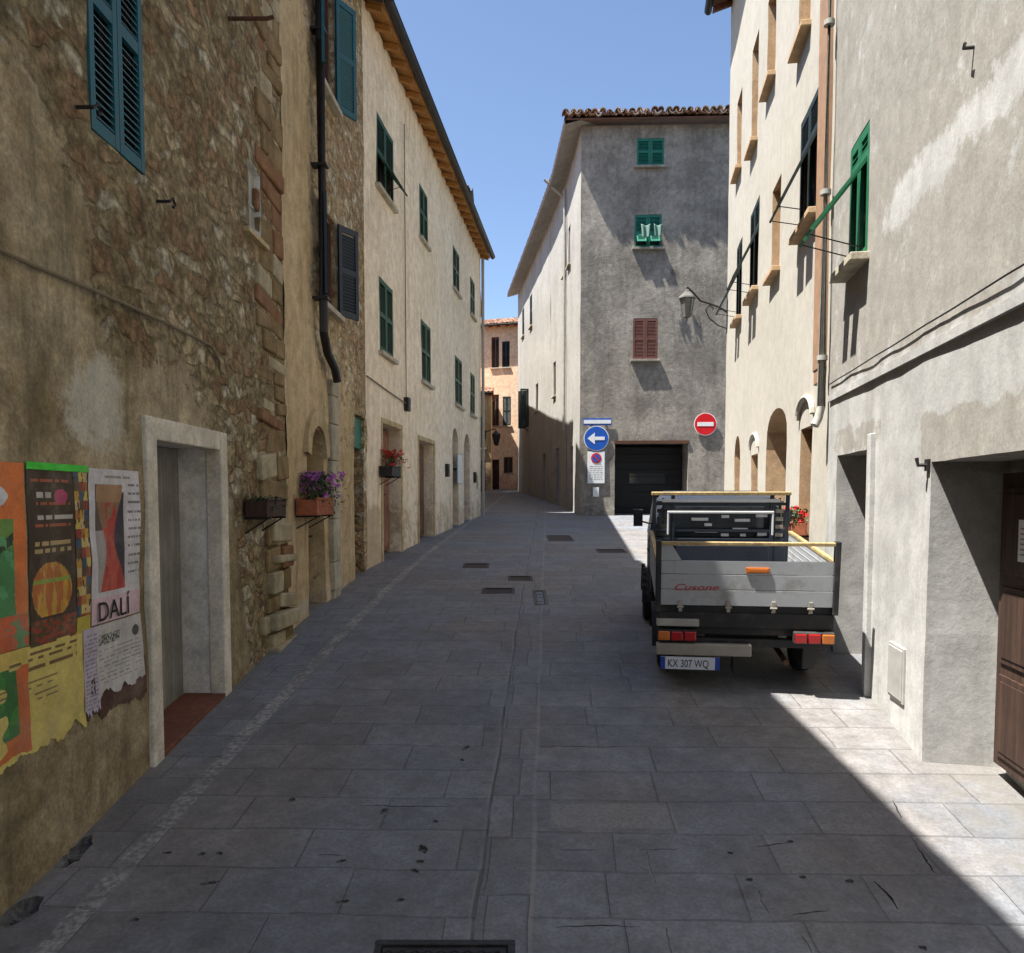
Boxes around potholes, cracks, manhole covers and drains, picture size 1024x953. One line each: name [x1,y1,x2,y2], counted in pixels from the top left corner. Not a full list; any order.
pothole [61,834,93,869]
pothole [0,896,44,928]
crack [874,881,898,909]
